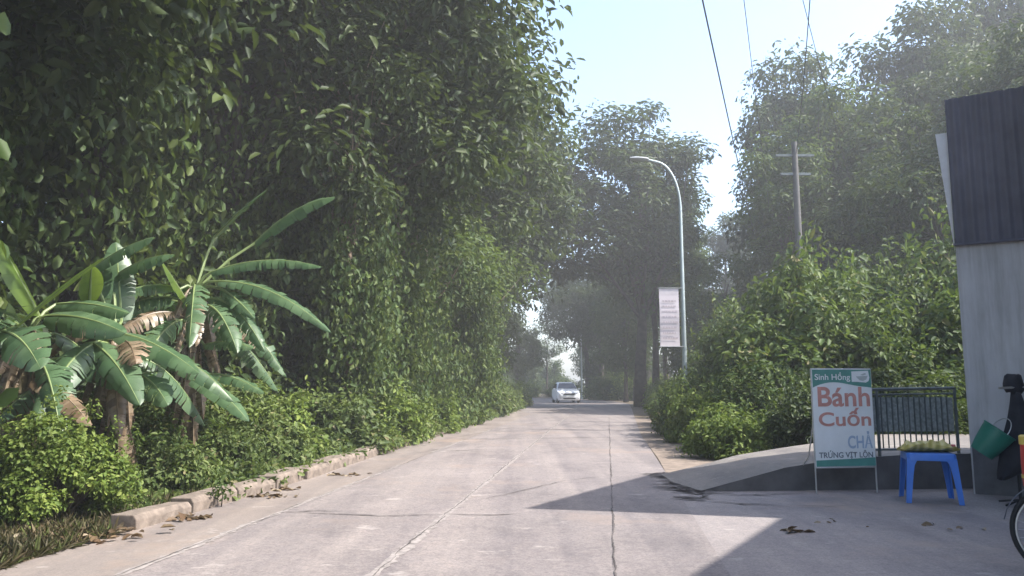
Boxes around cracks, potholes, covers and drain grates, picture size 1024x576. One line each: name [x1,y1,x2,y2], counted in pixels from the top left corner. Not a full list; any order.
crack [641,472,810,506]
